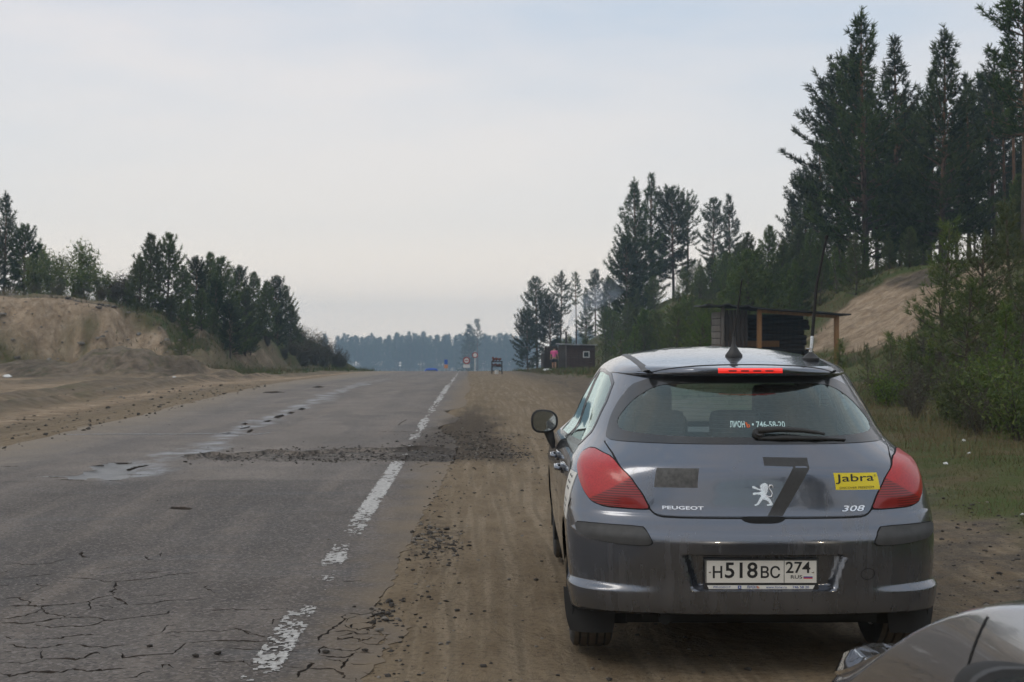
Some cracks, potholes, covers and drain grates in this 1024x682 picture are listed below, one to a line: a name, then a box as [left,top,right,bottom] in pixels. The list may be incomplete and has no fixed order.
crack [2,552,389,681]
pothole [38,462,149,480]
